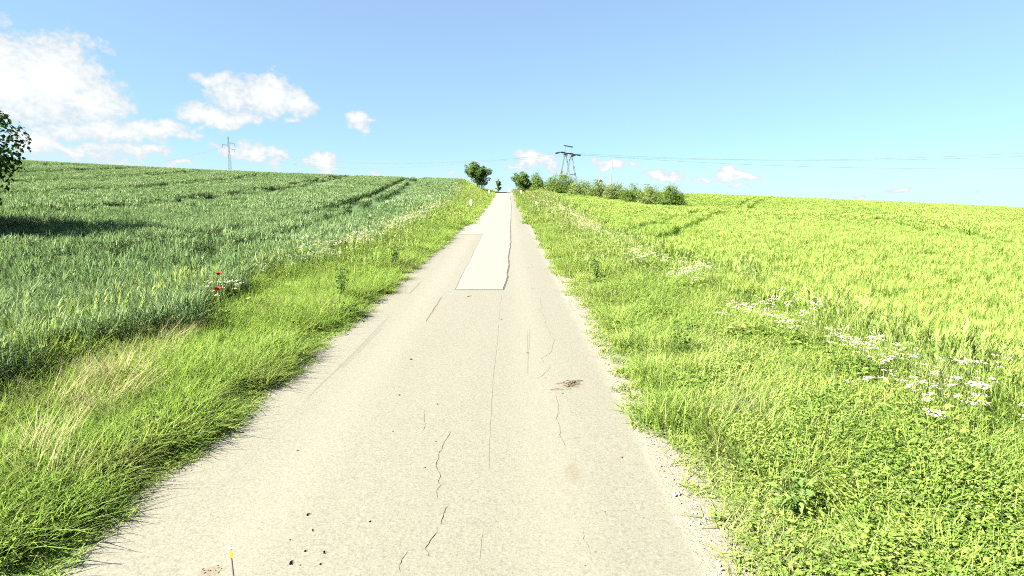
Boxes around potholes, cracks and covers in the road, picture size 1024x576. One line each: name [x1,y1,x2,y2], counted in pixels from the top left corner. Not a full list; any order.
crack [425,434,450,554]
